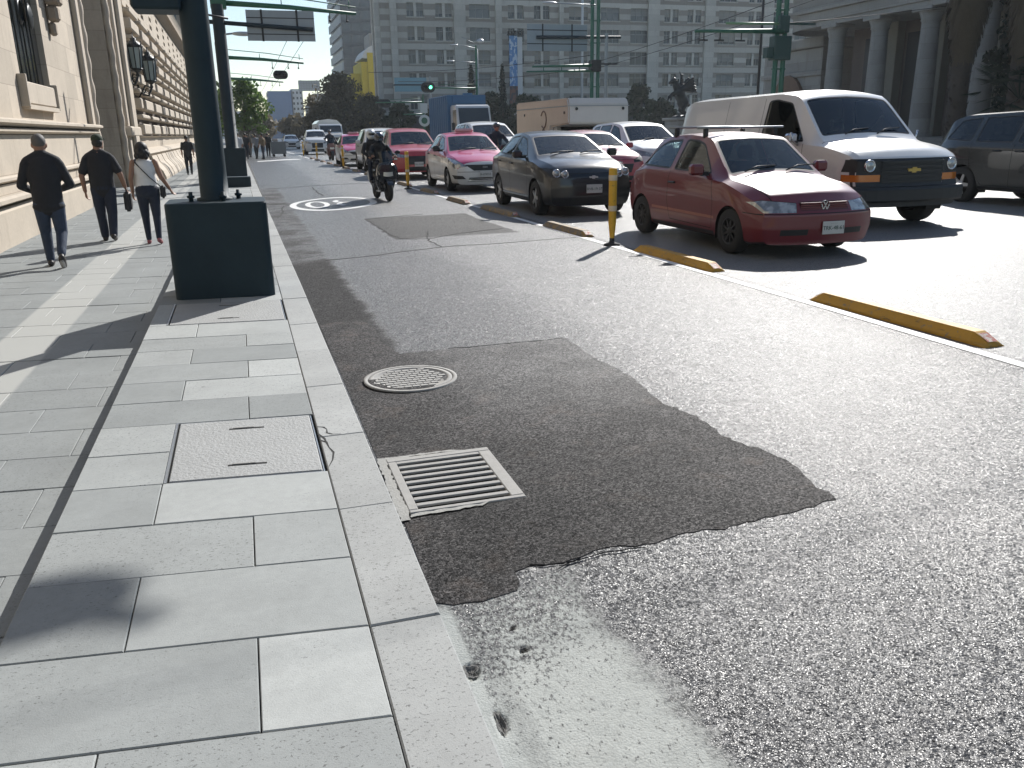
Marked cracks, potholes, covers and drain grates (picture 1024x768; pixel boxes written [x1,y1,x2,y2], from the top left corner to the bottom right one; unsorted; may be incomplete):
pothole [463,665,479,678]
drain grate [377,447,526,521]
manhole cover [363,365,457,393]
pothole [493,712,508,736]
crack [366,214,501,247]
